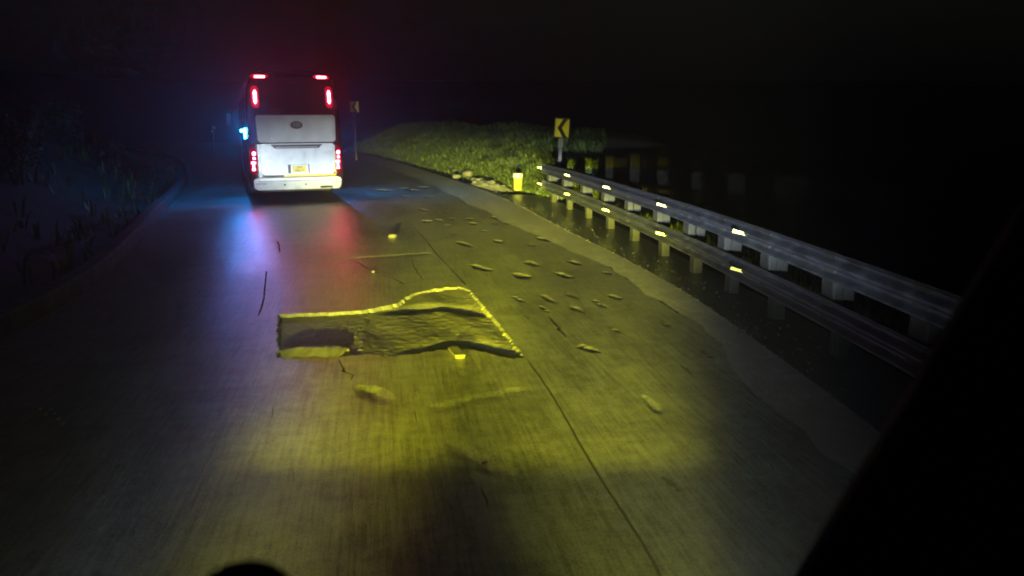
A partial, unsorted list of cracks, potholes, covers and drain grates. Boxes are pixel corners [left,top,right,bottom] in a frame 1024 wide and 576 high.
crack [548,315,566,337]
pothole [275,287,524,359]
pothole [639,395,664,414]
crack [258,271,267,317]
pothole [351,385,398,406]
